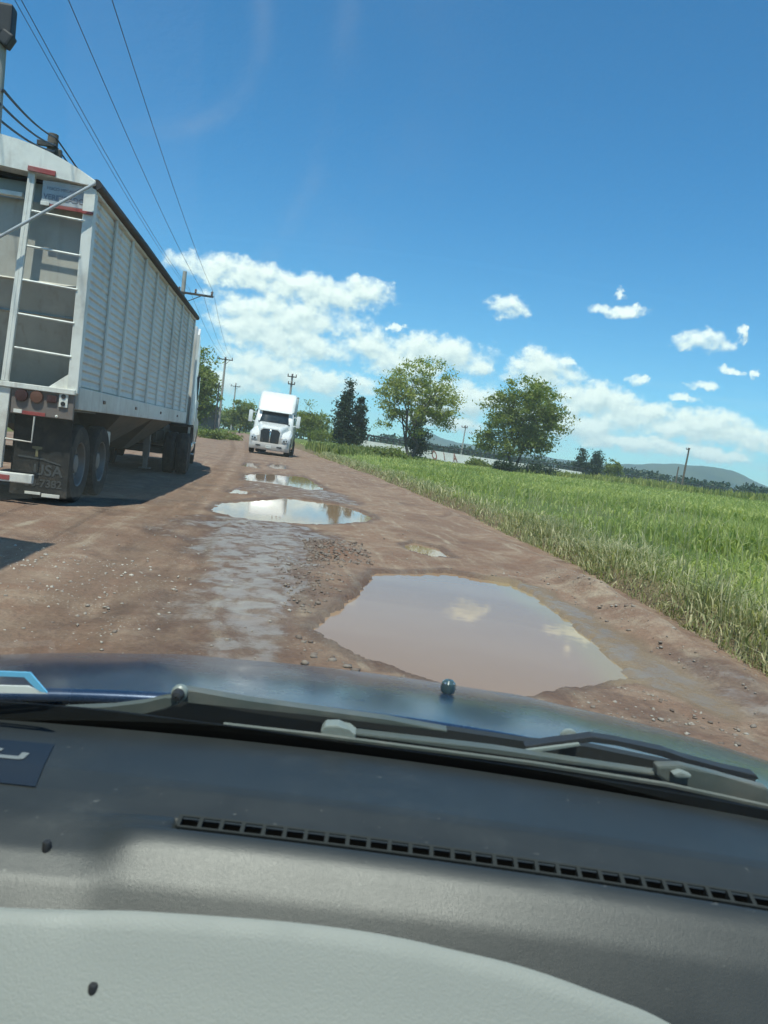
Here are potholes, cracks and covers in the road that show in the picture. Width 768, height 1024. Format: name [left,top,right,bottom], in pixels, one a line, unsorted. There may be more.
pothole [292,567,655,702]
pothole [238,471,335,491]
pothole [202,495,382,526]
pothole [392,538,465,560]
pothole [265,462,291,470]
